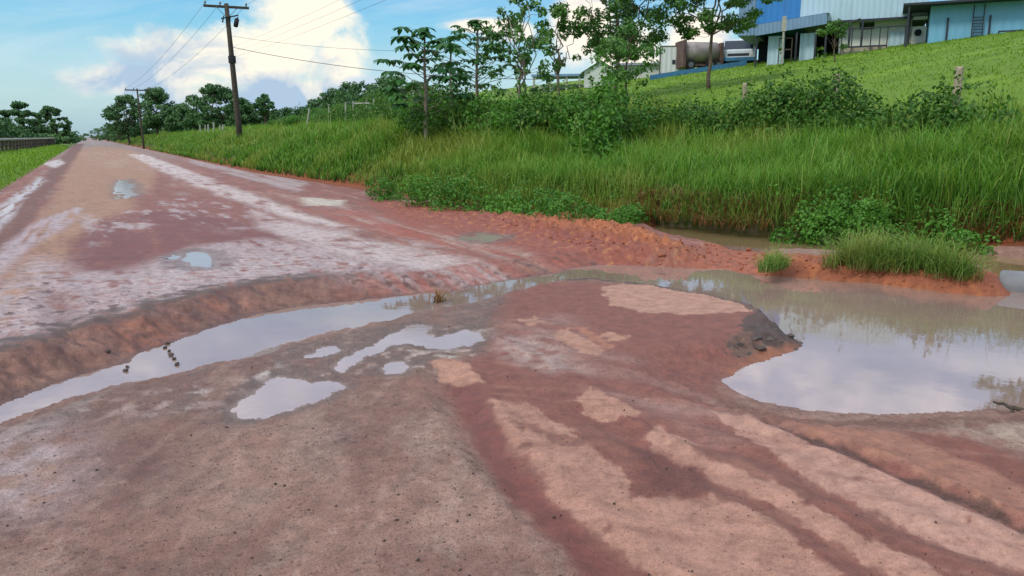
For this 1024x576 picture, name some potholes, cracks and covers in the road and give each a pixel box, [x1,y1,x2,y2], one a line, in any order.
pothole [542,194,1024,439]
pothole [0,253,573,441]
pothole [112,179,148,199]
pothole [165,249,231,269]
